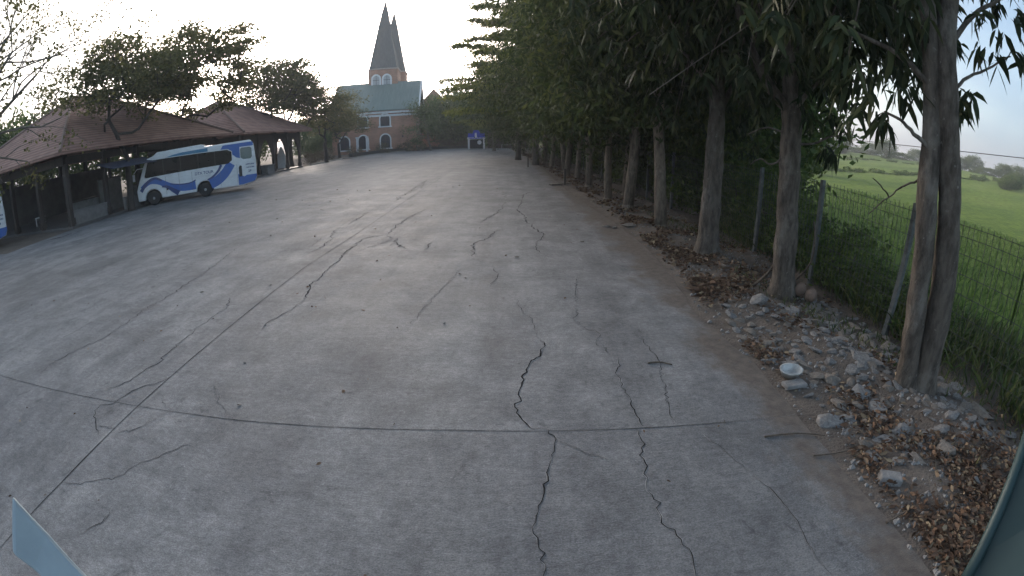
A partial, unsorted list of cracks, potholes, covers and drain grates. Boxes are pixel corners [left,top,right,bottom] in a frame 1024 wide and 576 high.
crack [40,232,279,374]
crack [514,301,612,576]
crack [60,436,216,485]
crack [573,276,832,576]
crack [410,192,546,323]
crack [261,176,441,331]
crack [93,297,230,437]
